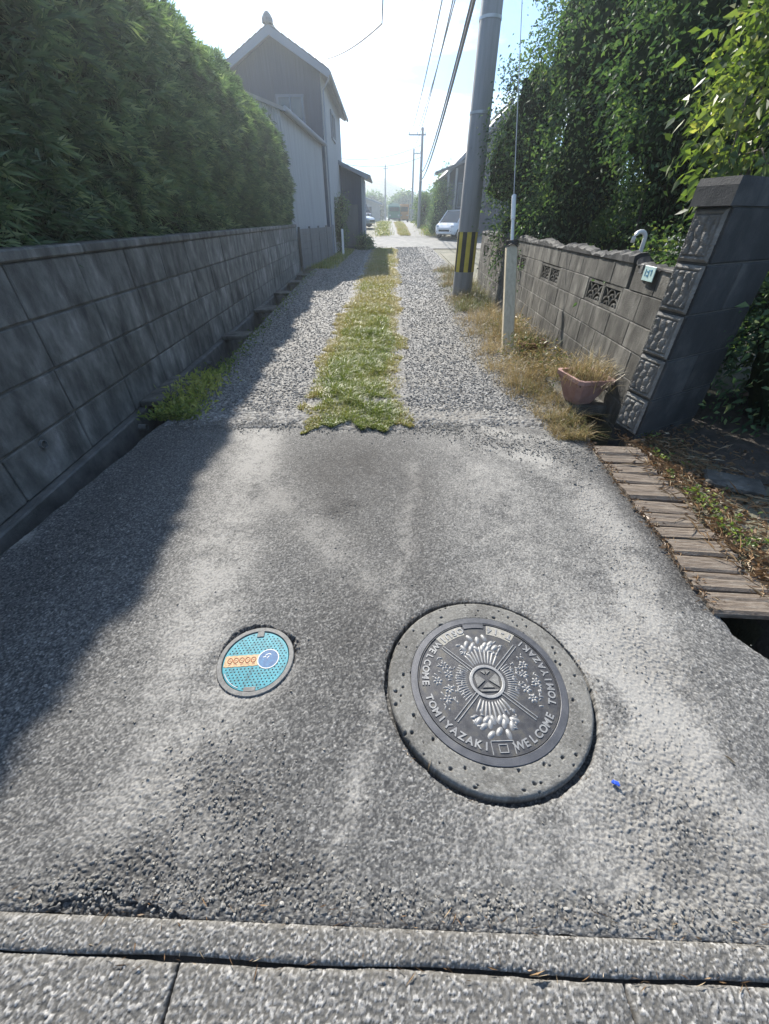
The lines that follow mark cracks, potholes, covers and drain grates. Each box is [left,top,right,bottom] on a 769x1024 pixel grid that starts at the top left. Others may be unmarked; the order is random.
manhole cover [216,628,295,698]
manhole cover [388,604,594,804]
